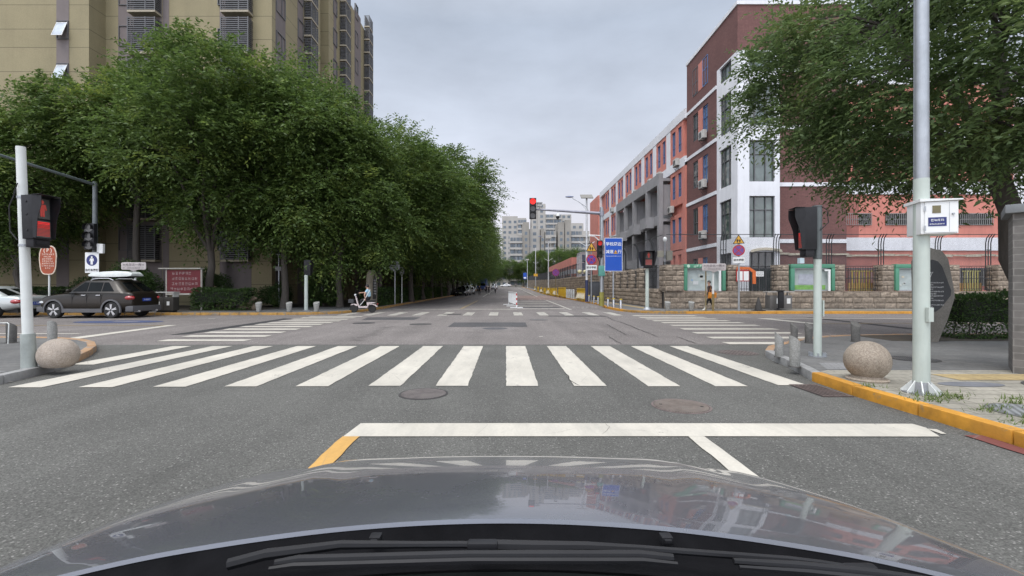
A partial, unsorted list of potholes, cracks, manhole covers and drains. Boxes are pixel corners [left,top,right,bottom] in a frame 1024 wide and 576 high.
drain grate [789,384,854,397]
manhole cover [651,399,712,414]
manhole cover [398,388,448,400]
